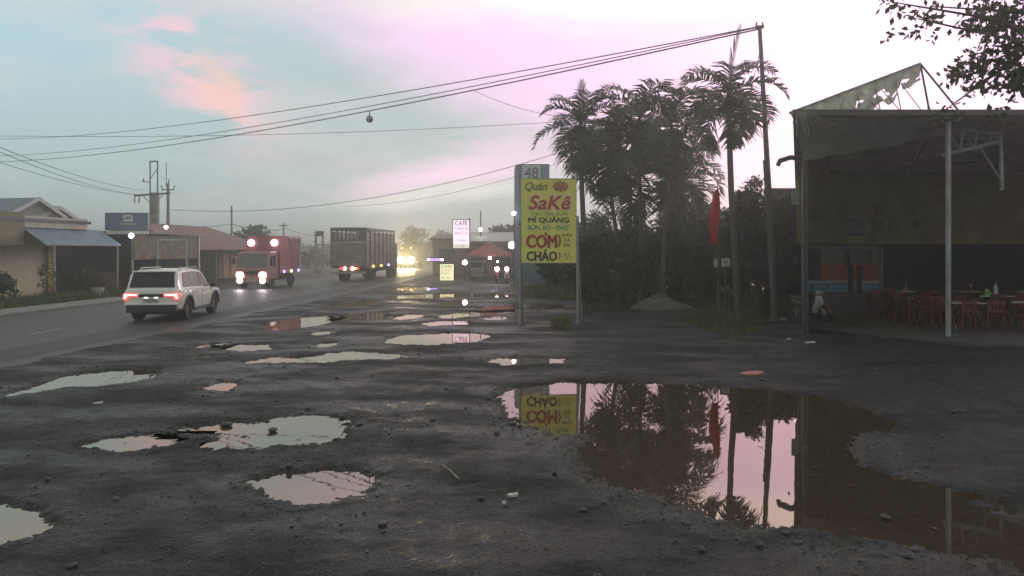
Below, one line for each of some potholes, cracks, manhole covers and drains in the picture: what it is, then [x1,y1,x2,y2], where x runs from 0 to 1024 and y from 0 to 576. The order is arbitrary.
pothole [490,379,1024,576]
pothole [49,427,220,456]
pothole [0,491,78,552]
pothole [472,353,581,367]
pothole [235,348,428,365]
pothole [254,314,347,331]
pothole [405,319,476,327]
pothole [227,459,399,513]
pothole [207,341,286,353]
pothole [373,331,499,346]
pothole [186,377,255,394]
